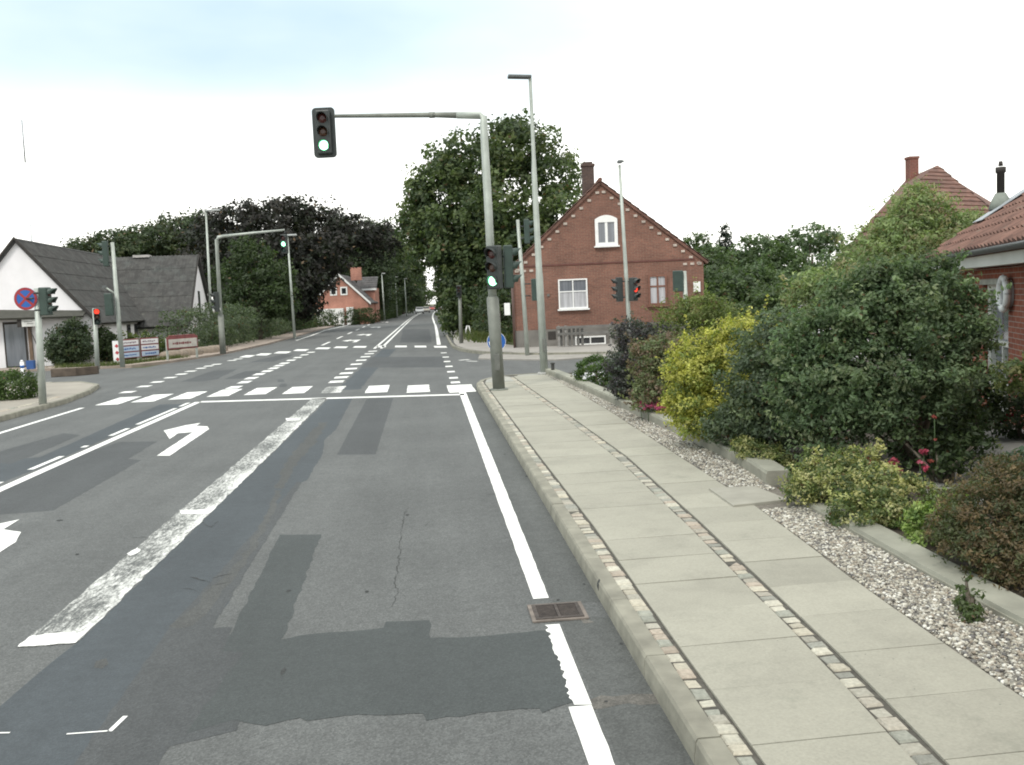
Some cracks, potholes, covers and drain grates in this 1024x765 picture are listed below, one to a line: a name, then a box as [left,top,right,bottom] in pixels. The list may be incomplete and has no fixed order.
crack [381,508,408,605]
drain grate [527,601,589,623]
